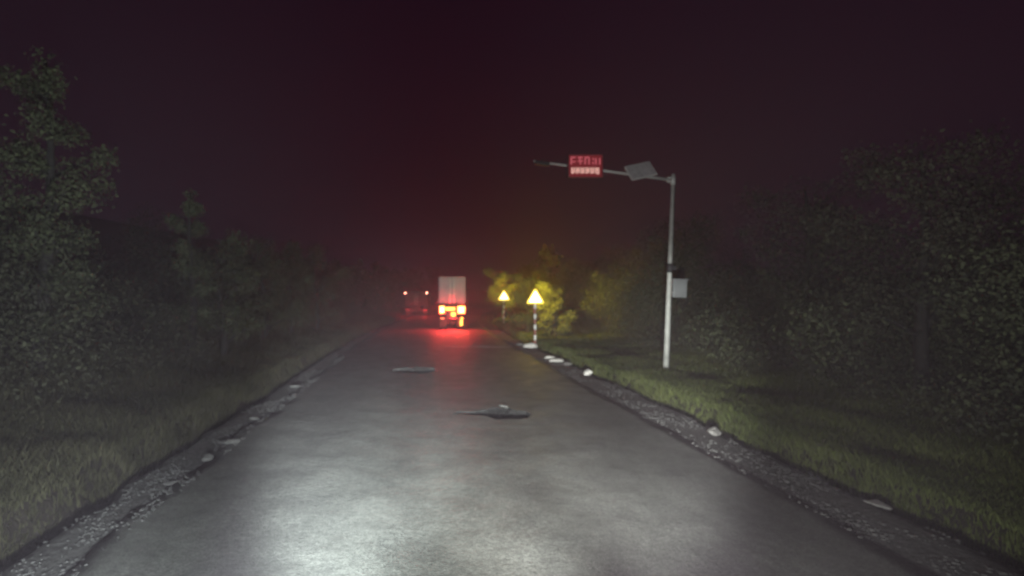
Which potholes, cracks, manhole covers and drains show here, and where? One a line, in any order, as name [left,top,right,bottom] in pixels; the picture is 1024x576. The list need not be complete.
pothole [453,407,533,420]
